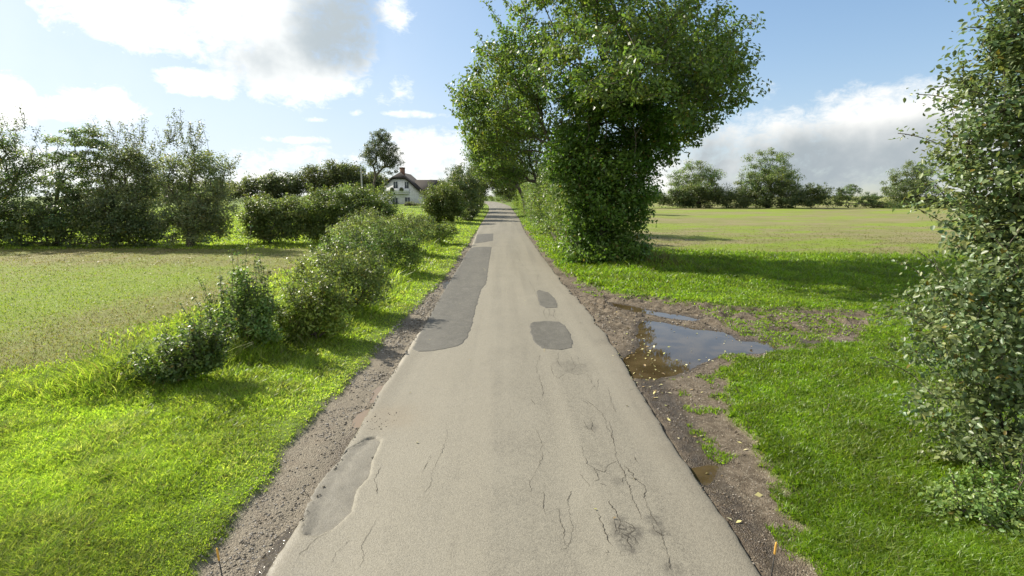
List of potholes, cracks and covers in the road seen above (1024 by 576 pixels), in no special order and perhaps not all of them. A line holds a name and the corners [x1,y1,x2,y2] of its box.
crack [529,352,671,568]
